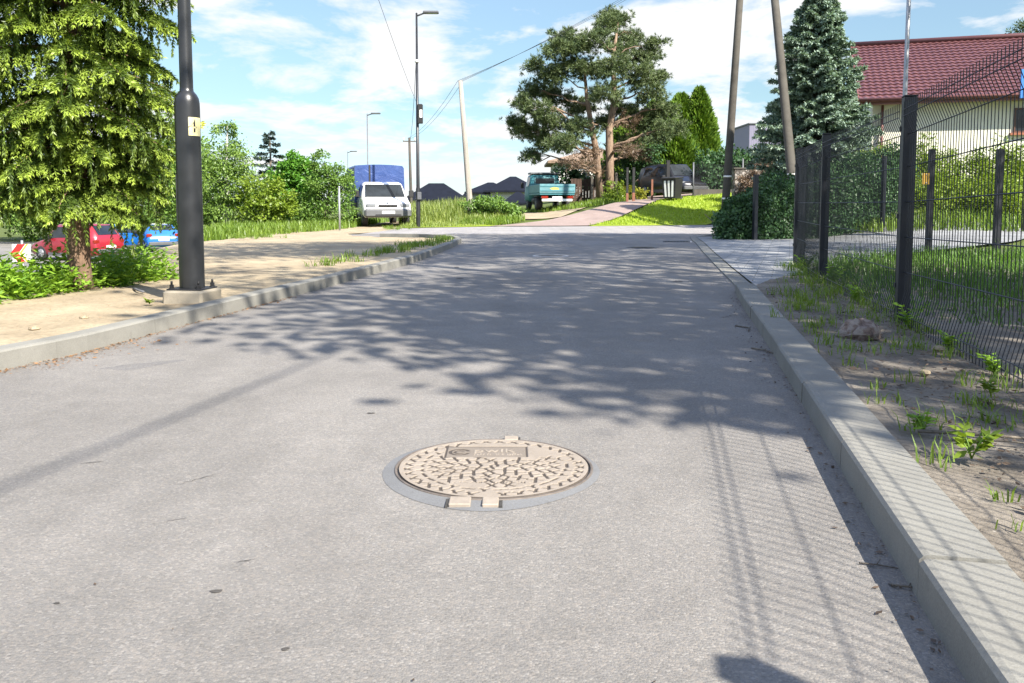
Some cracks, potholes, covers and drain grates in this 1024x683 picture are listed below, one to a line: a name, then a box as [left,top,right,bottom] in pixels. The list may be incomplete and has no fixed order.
manhole cover [382,436,600,511]
